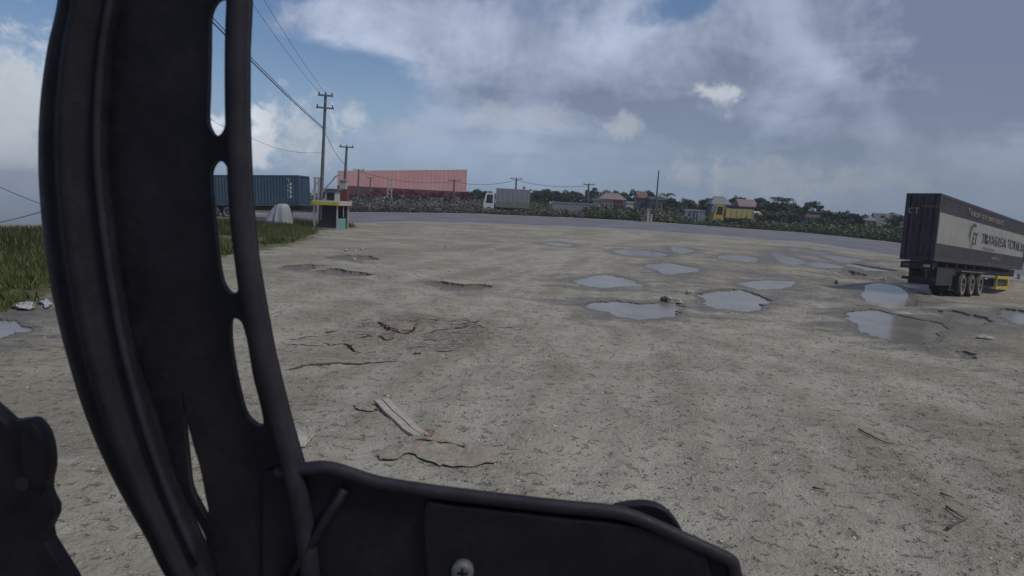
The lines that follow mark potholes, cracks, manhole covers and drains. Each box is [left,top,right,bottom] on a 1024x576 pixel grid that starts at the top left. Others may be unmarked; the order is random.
crack [284,318,512,370]
pothole [843,309,949,345]
pothole [645,263,701,275]
pothole [736,280,797,290]
pothole [583,300,686,320]
pothole [0,319,33,338]
pothole [573,275,643,288]
pothole [316,268,373,277]
pothole [861,283,918,307]
pothole [610,249,670,257]
pothole [696,289,772,312]
